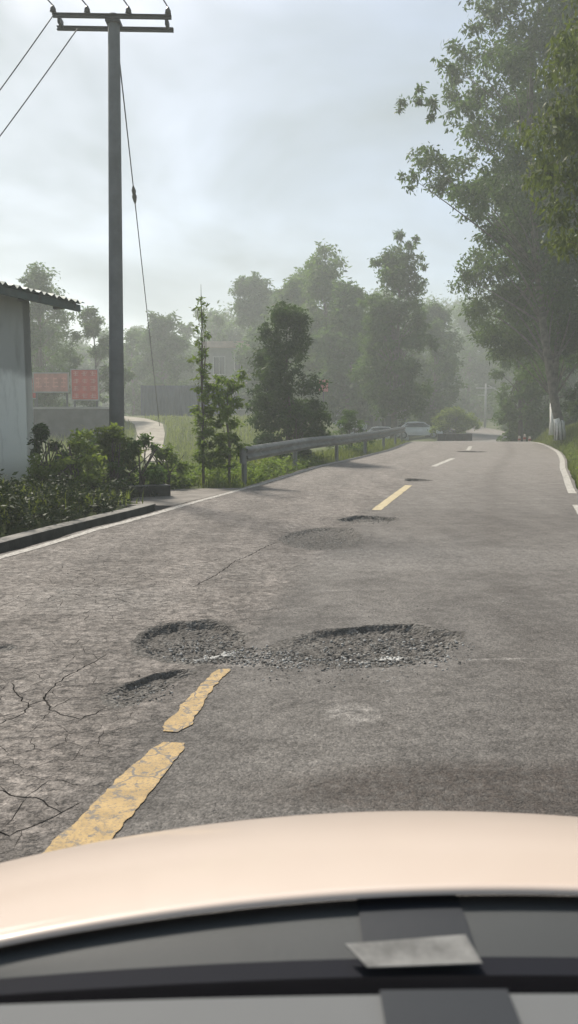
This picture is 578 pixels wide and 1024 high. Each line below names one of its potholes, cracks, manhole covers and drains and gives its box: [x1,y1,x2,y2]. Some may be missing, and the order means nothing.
pothole [128,619,249,666]
crack [193,543,275,587]
pothole [263,624,465,669]
pothole [278,527,366,550]
crack [0,637,144,854]
pothole [101,669,199,709]
